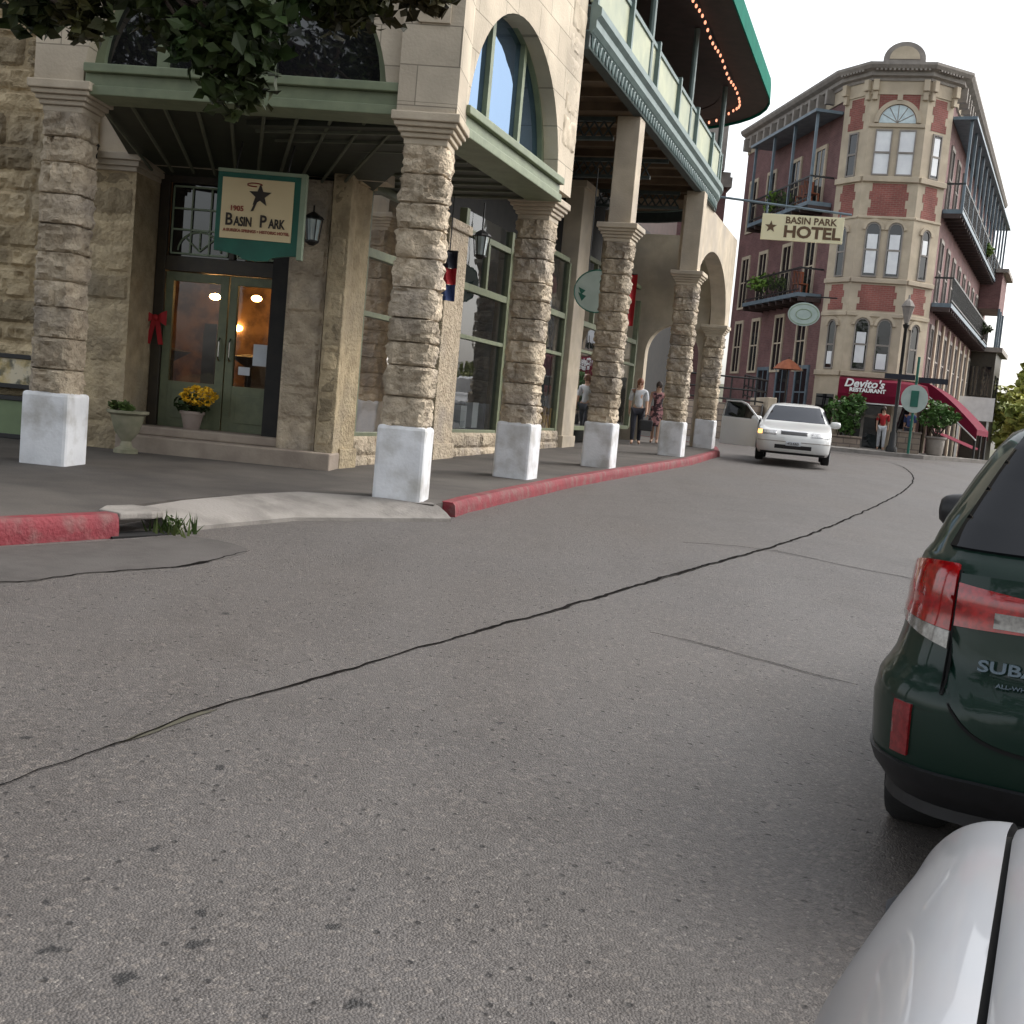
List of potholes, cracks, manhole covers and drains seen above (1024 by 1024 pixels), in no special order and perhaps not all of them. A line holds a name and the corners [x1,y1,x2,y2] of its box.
crack [652,632,857,685]
crack [0,550,250,582]
crack [686,542,908,578]
drain grate [99,505,176,539]
